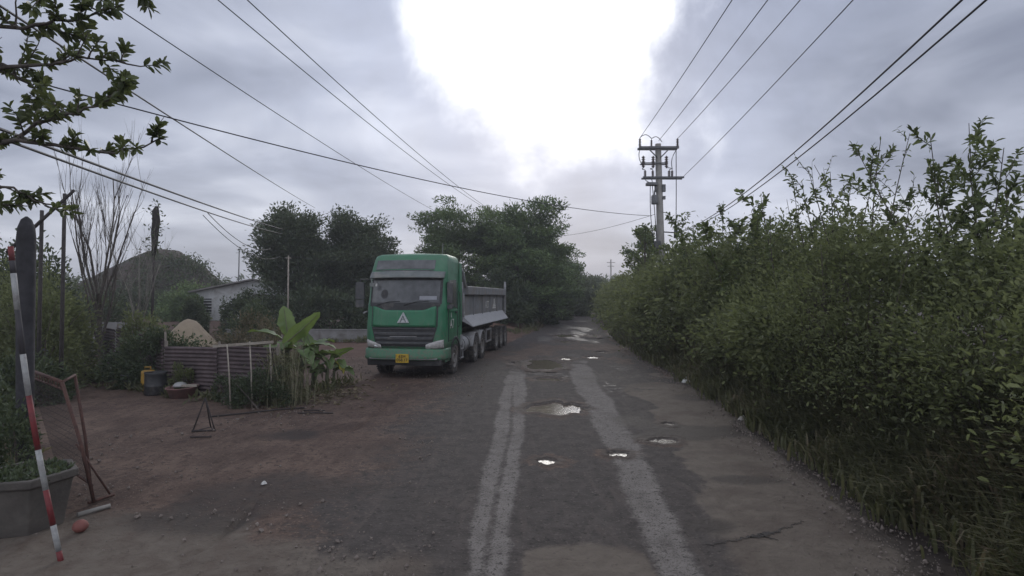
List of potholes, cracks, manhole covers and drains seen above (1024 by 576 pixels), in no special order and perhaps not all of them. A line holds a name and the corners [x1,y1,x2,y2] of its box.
pothole [652,420,686,428]
pothole [636,435,689,447]
pothole [513,398,601,418]
pothole [597,448,639,459]
pothole [512,358,575,372]
crack [705,521,804,545]
pothole [526,455,568,468]
